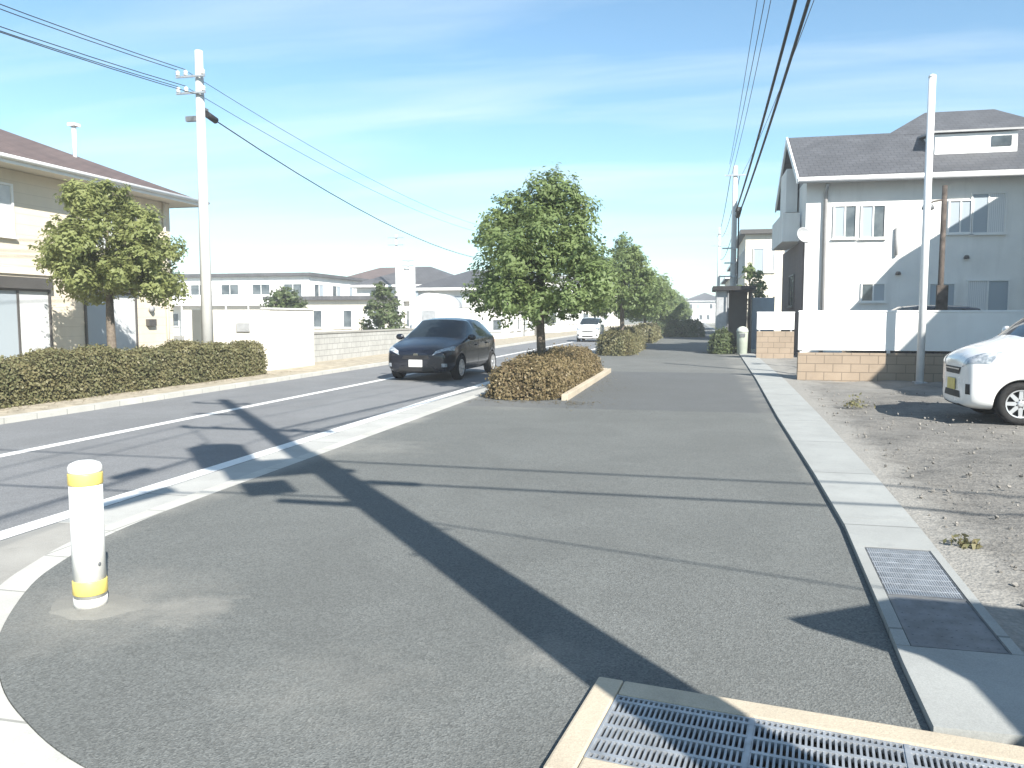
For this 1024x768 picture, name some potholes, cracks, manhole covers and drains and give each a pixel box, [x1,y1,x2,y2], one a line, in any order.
drain grate [543,677,1024,768]
